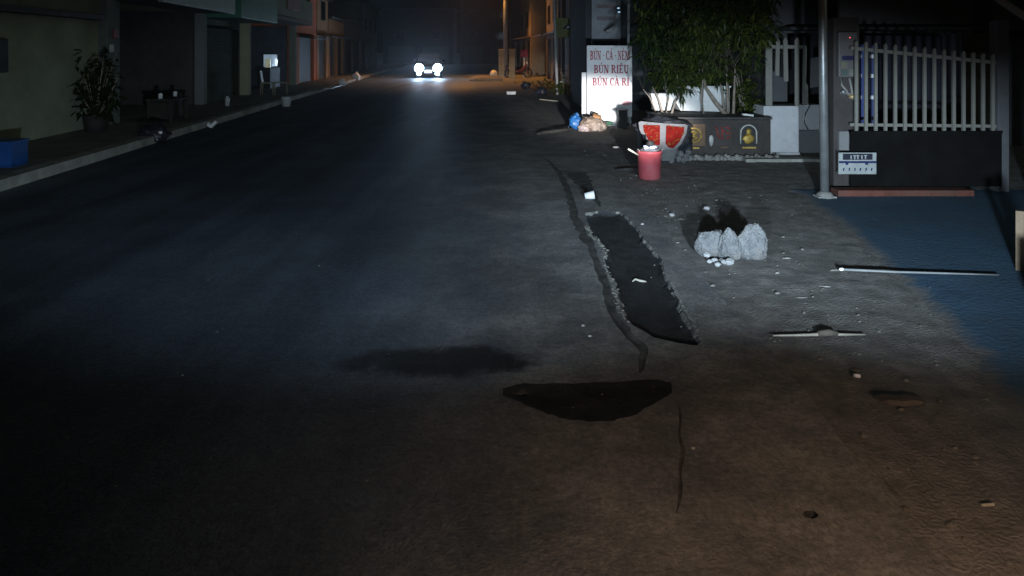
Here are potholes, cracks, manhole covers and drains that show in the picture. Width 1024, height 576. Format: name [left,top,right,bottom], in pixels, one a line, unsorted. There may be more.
crack [540,156,685,512]
pothole [503,379,672,422]
pothole [584,211,702,345]
